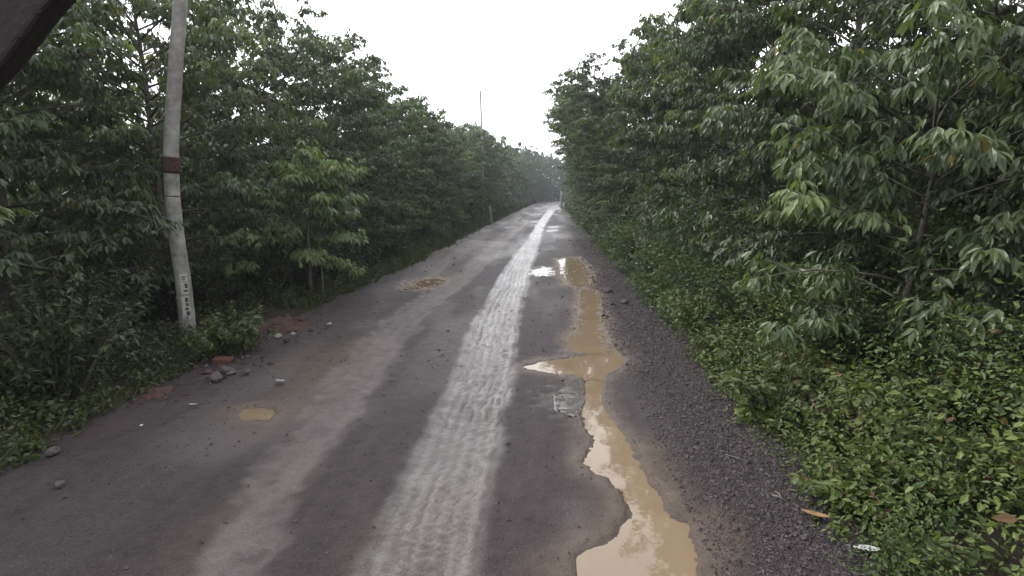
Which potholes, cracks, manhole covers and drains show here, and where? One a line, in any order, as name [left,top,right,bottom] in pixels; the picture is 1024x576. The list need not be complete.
pothole [566,375,704,576]
pothole [518,350,629,382]
pothole [528,266,555,277]
pothole [557,257,594,288]
pothole [404,277,447,291]
pothole [566,288,614,355]
